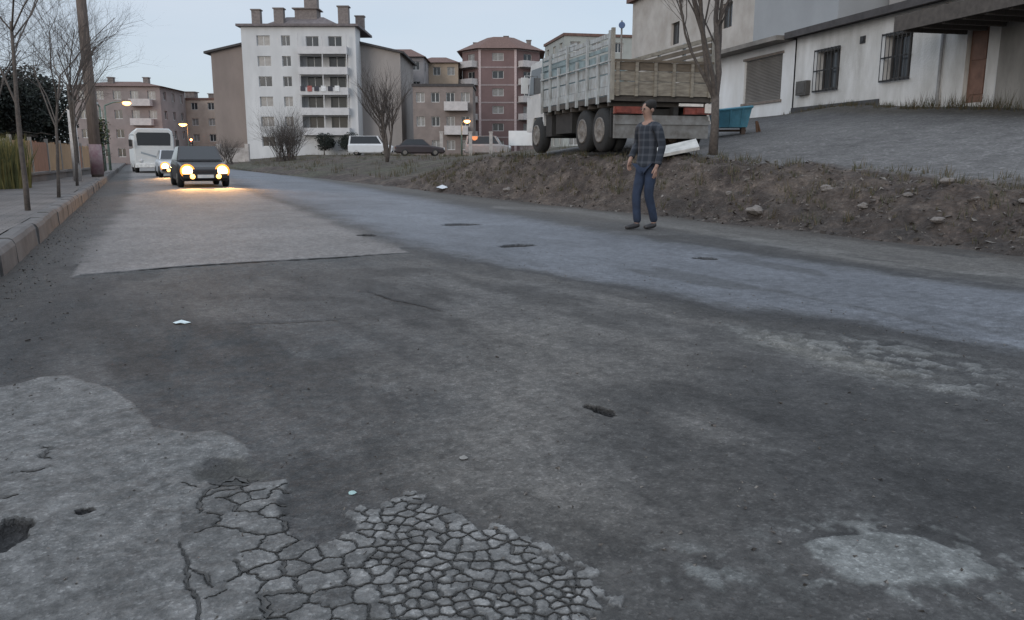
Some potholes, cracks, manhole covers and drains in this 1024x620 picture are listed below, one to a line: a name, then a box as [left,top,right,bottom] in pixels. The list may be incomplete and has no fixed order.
crack [20,446,52,472]
crack [179,476,601,620]
pothole [0,508,57,563]
crack [367,290,442,311]
